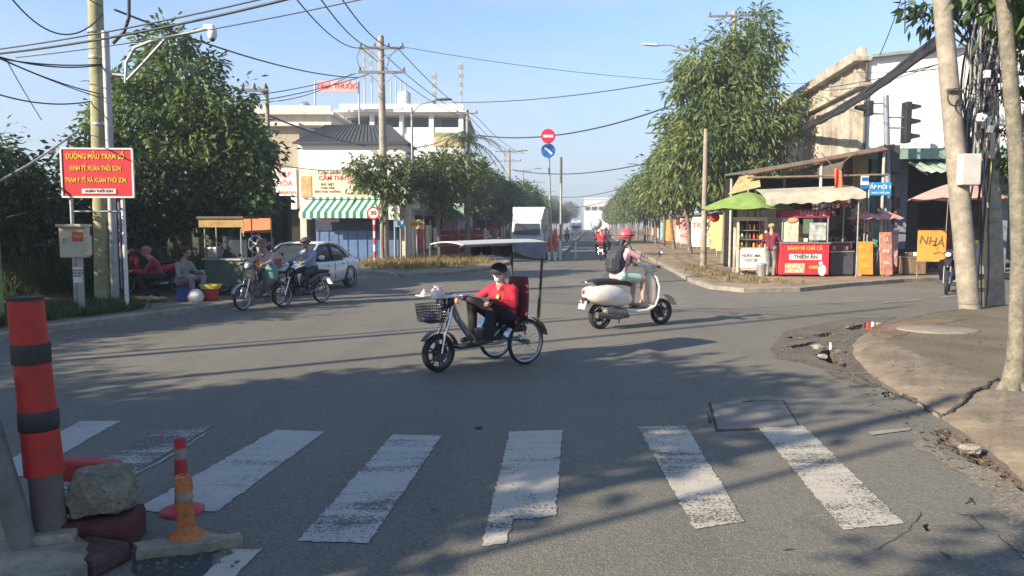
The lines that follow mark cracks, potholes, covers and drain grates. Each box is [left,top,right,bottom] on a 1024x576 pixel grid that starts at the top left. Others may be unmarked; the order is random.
crack [973,377,1010,402]
pothole [816,349,843,364]
crack [958,497,1024,553]
manhole cover [896,325,980,334]
crack [873,512,921,550]
manhole cover [707,400,799,432]
